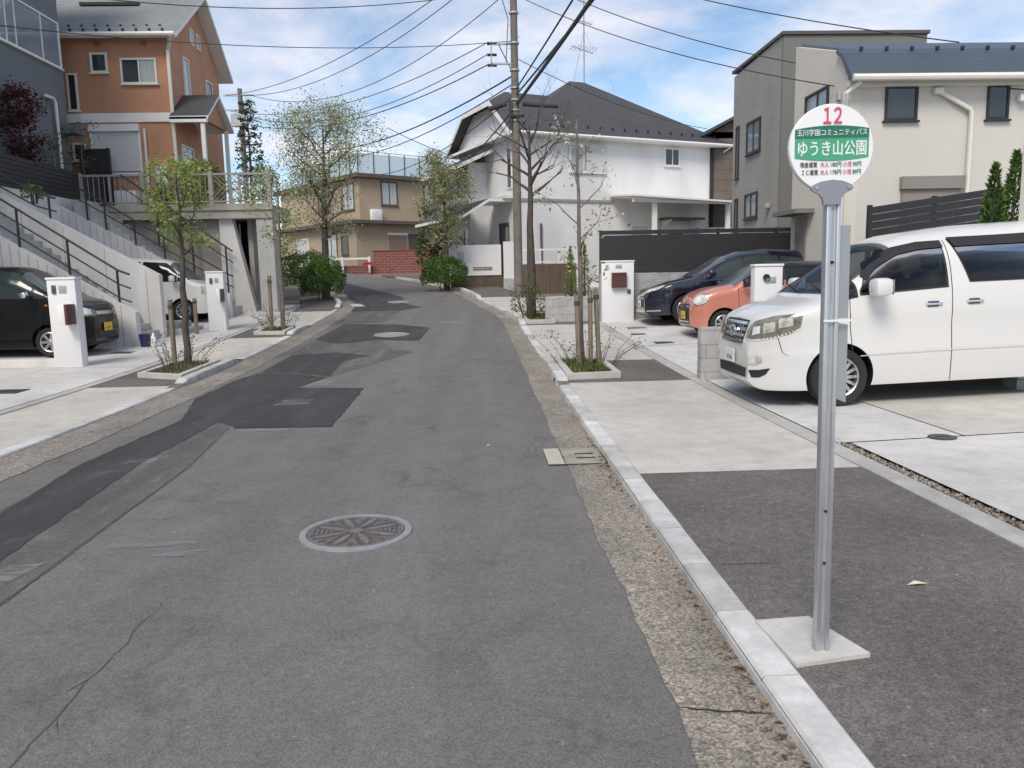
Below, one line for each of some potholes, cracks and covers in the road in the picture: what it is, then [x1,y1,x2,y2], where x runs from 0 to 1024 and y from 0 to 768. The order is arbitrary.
crack [9,591,172,768]
manhole cover [299,514,412,552]
